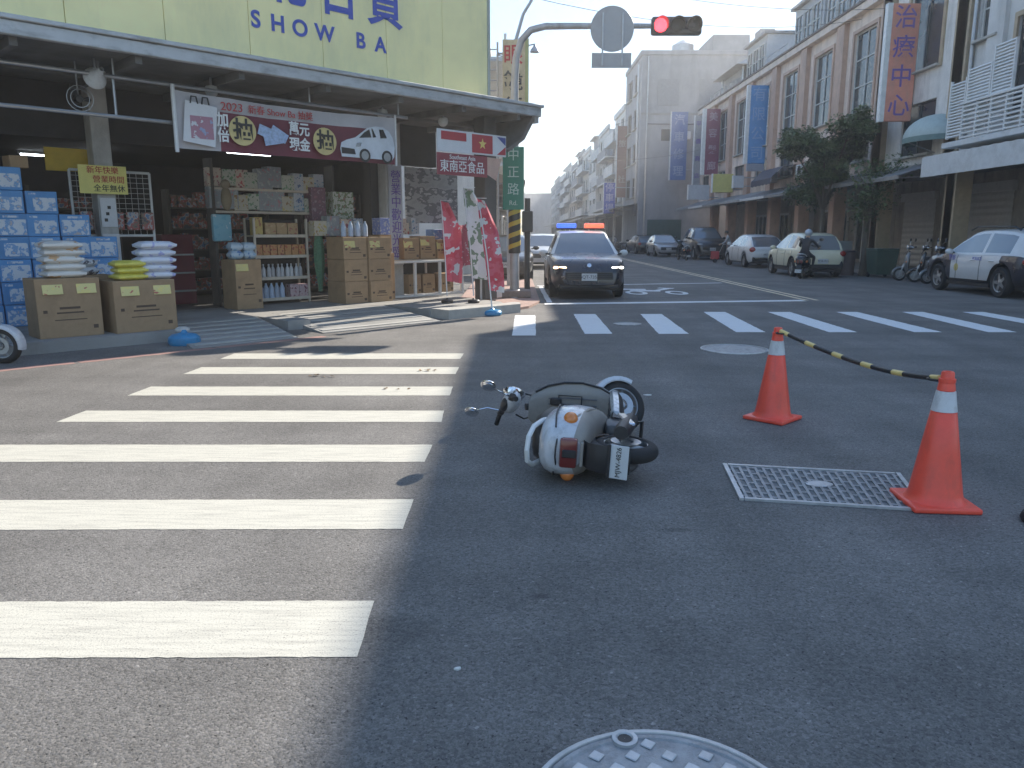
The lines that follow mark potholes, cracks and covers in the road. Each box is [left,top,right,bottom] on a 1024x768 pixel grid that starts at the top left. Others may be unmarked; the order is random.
manhole cover [700,344,769,354]
manhole cover [542,729,767,768]
